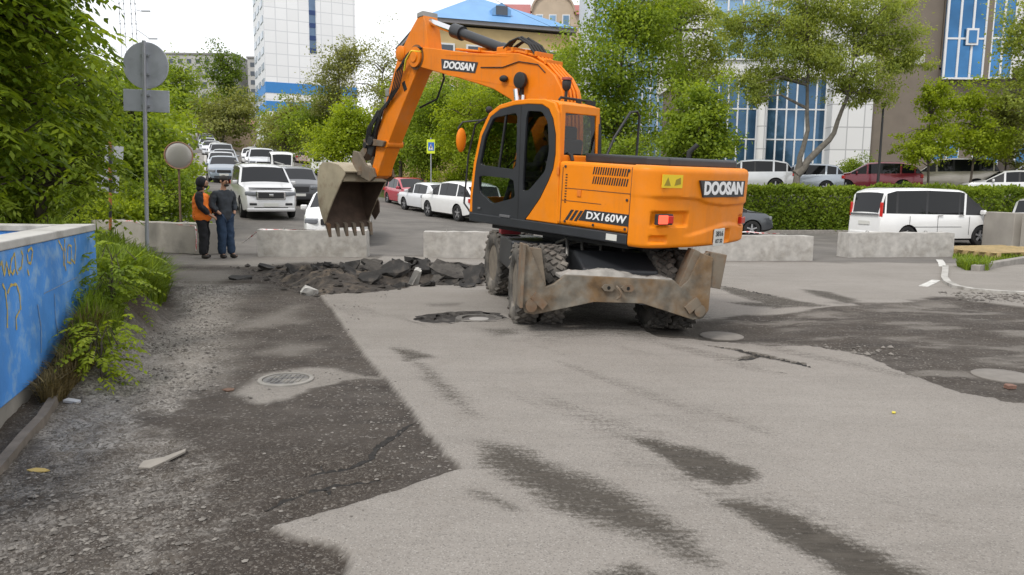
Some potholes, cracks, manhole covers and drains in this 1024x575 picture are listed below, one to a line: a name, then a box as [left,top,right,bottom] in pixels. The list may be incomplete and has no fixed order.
manhole cover [700,331,744,341]
crack [717,347,811,374]
manhole cover [455,314,502,322]
manhole cover [970,368,1024,384]
crack [268,423,414,511]
